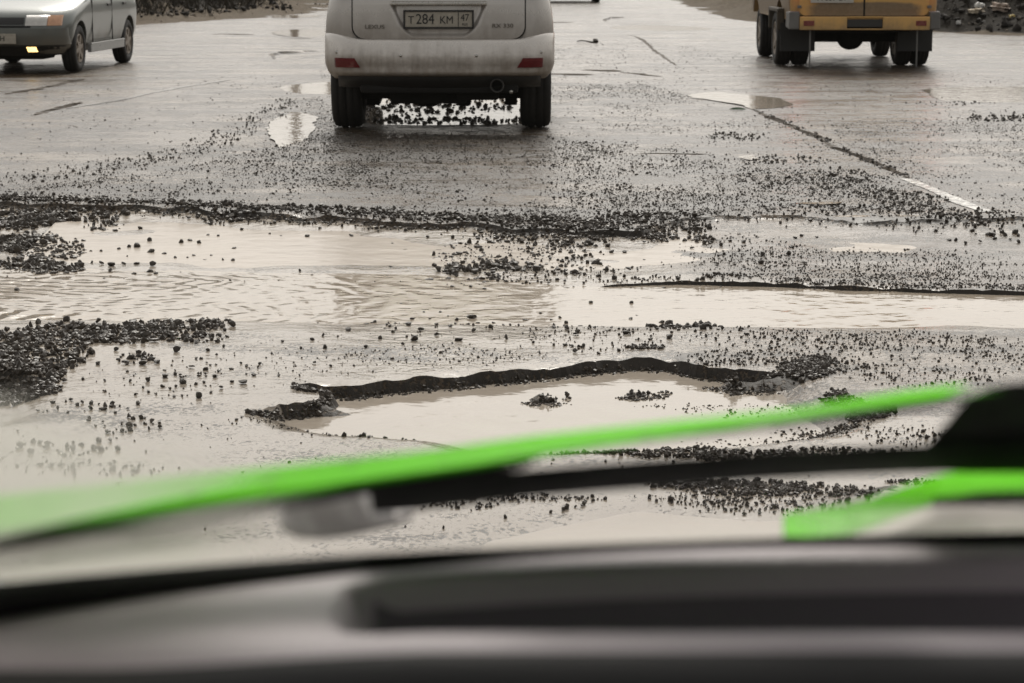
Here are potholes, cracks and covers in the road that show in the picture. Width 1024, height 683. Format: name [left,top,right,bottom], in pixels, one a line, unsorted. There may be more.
pothole [0,201,1024,287]
crack [551,35,676,77]
crack [5,79,85,115]
pothole [235,357,894,457]
pothole [7,280,1024,330]
